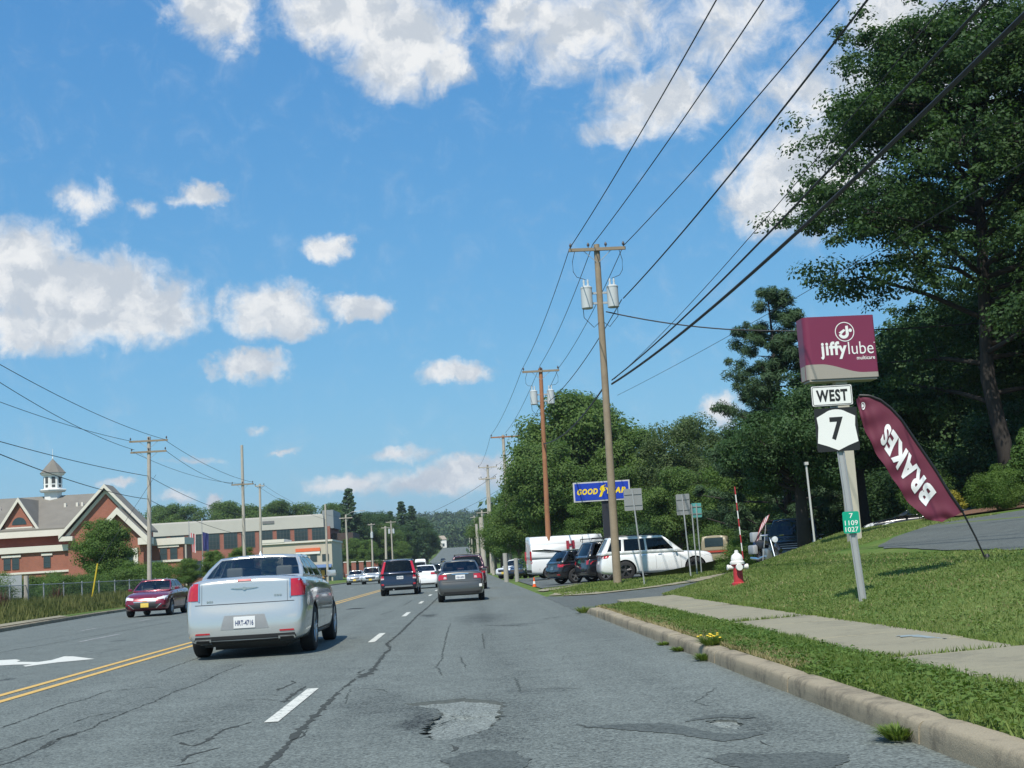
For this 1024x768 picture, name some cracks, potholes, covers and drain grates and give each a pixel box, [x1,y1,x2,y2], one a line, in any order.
crack [252,681,306,702]
pothole [407,698,507,740]
crack [0,658,242,765]
crack [435,623,467,676]
